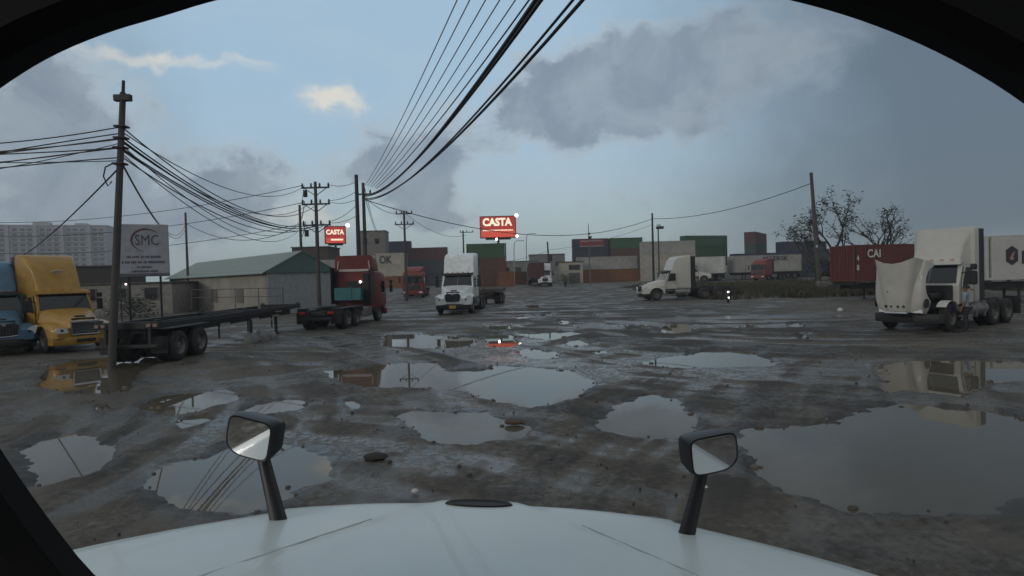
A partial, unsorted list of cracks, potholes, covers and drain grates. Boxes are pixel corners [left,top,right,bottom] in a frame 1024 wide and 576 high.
pothole [582,391,711,442]
pothole [21,356,172,395]
pothole [379,333,479,349]
pothole [865,355,1024,400]
pothole [634,345,785,368]
pothole [116,439,353,520]
pothole [1,428,135,489]
pothole [384,407,543,448]
pothole [124,386,253,417]
pothole [316,361,606,409]
pothole [720,399,1024,522]
